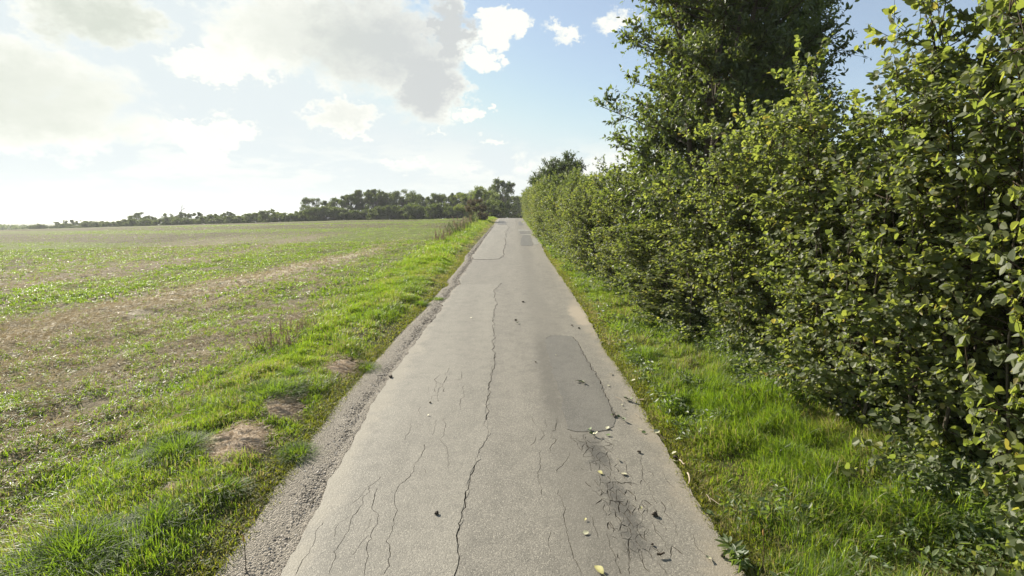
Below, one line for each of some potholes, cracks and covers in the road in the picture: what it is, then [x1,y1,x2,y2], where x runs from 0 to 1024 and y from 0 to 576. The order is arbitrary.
crack [296,374,464,576]
crack [531,418,710,575]
